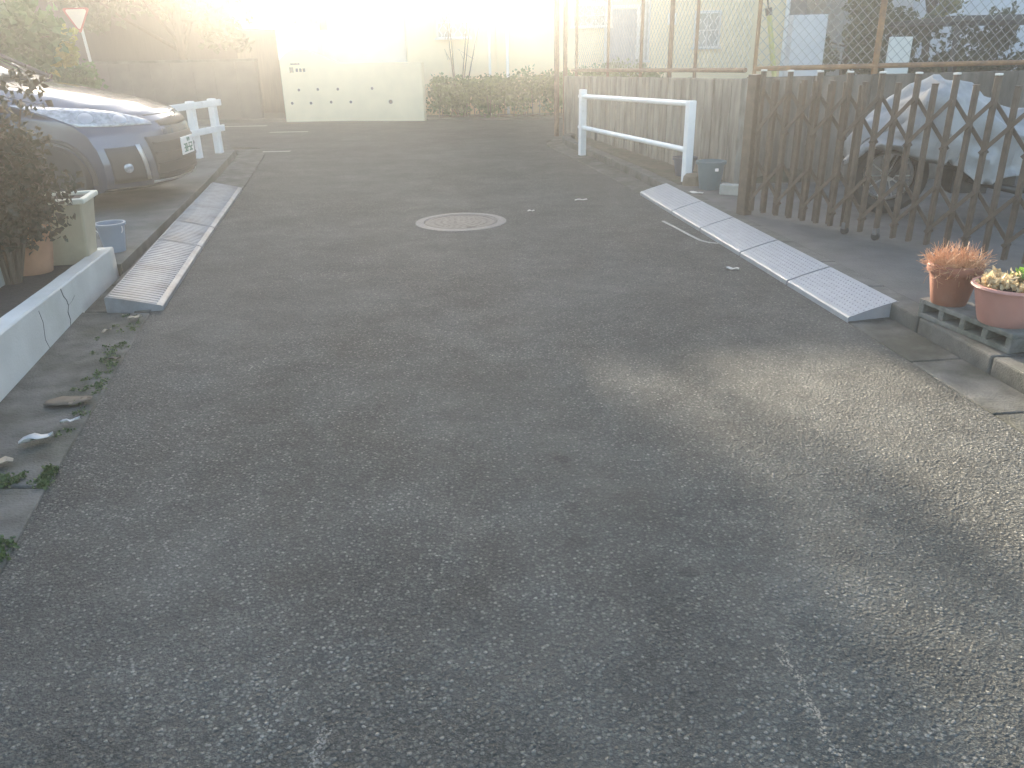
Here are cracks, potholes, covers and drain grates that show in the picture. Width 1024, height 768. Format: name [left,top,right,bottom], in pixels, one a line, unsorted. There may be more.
manhole cover [416,213,506,232]
